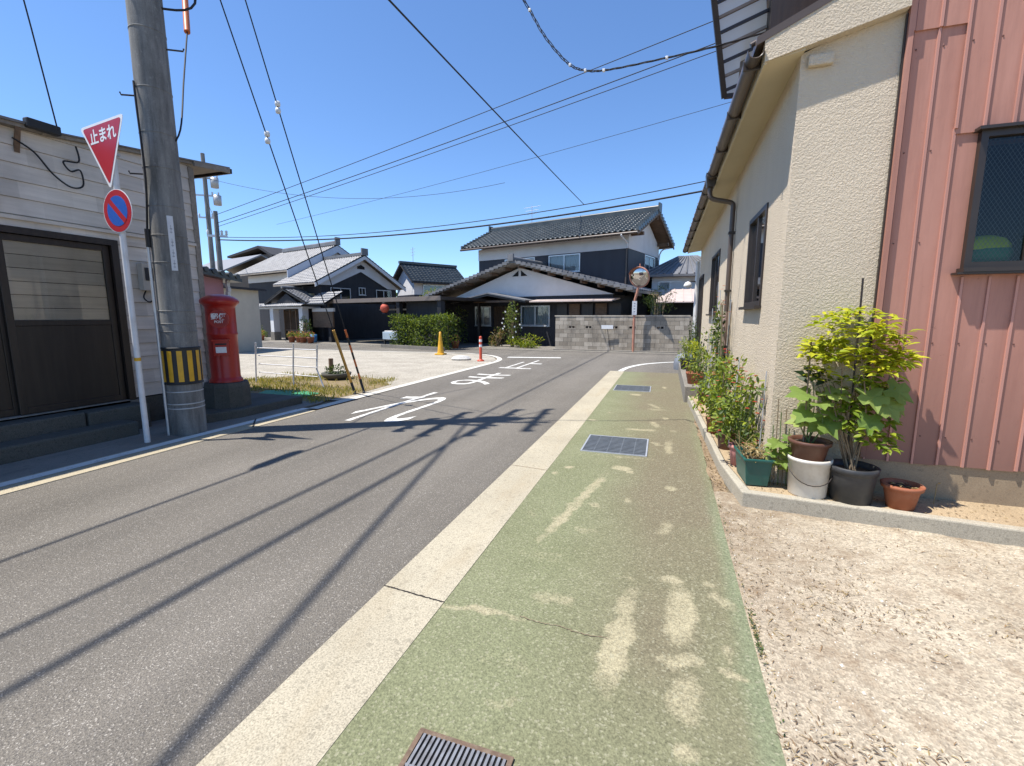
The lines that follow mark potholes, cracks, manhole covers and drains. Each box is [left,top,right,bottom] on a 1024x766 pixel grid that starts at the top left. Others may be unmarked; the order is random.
drain grate [398,727,514,766]
drain grate [580,434,649,457]
crack [519,615,608,639]
